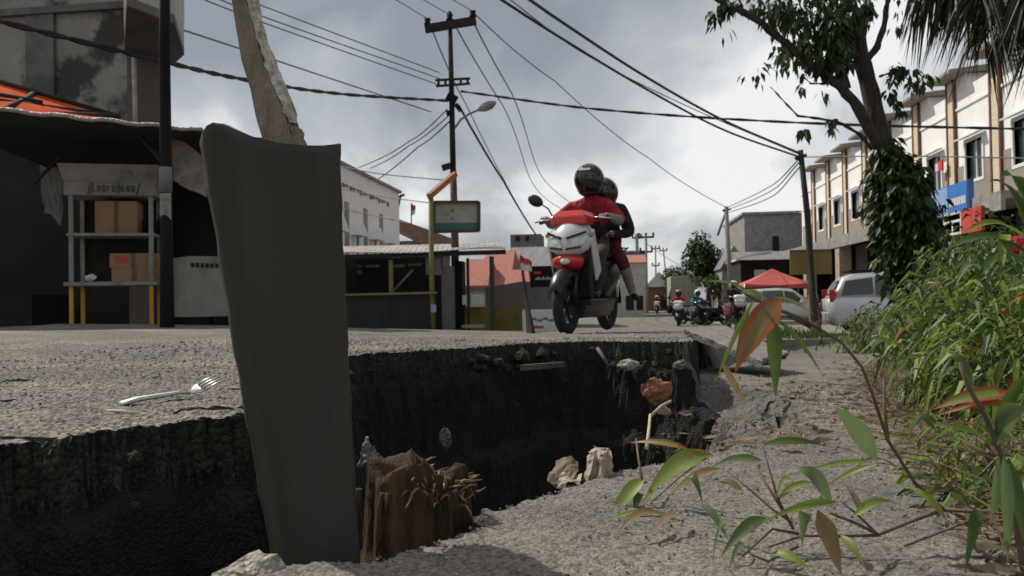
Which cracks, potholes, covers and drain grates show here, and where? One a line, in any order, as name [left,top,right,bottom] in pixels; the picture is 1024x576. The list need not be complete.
pothole [0,335,814,576]
crack [167,407,208,415]
crack [751,392,858,441]
